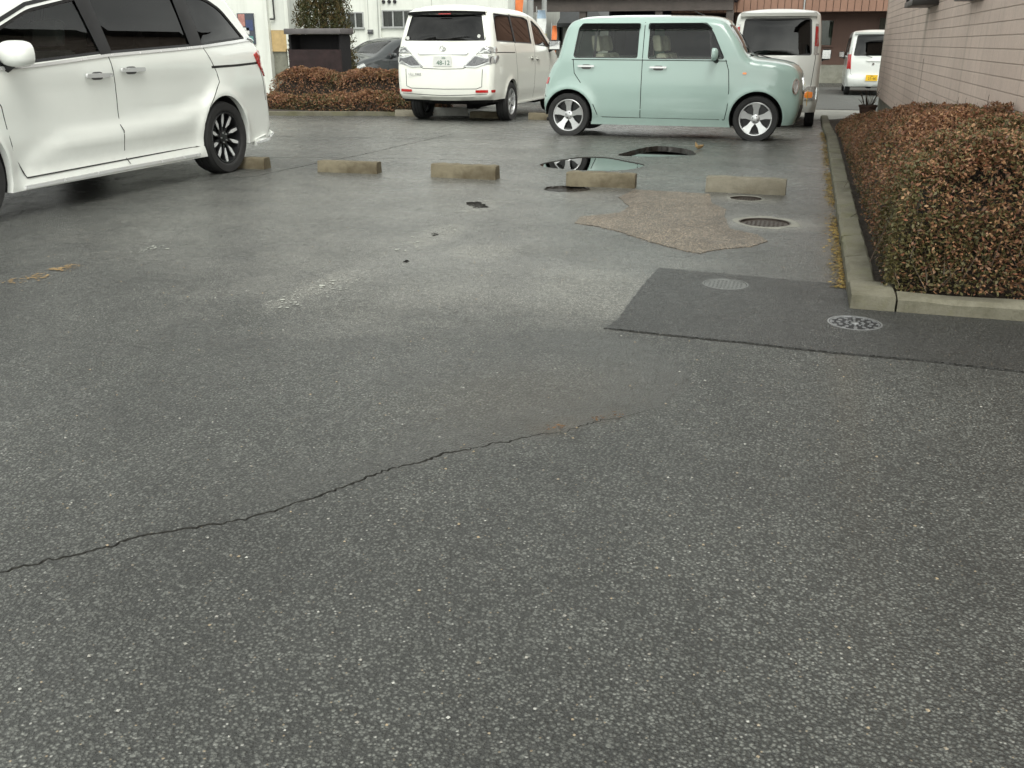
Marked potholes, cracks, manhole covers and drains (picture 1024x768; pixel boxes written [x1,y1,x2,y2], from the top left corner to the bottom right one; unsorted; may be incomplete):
crack [0,410,650,573]
pothole [540,157,645,171]
pothole [619,146,696,157]
manhole cover [732,216,801,229]
manhole cover [702,278,749,290]
manhole cover [827,315,883,330]
